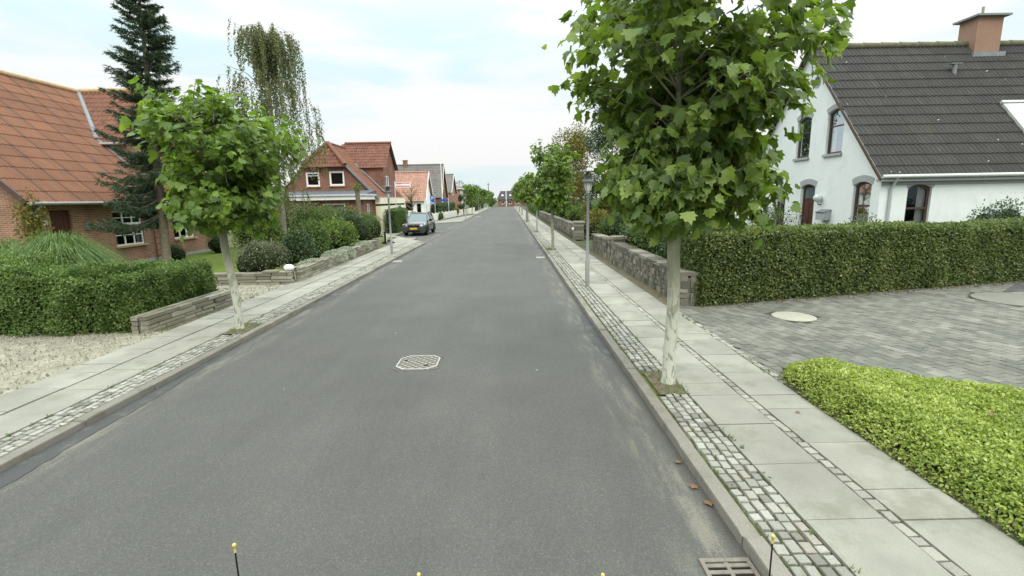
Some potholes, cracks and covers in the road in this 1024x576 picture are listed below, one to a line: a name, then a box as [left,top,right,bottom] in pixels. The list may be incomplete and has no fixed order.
manhole cover [969,293,1024,307]
manhole cover [392,354,444,371]
manhole cover [771,312,817,323]
drain grate [698,557,760,576]
